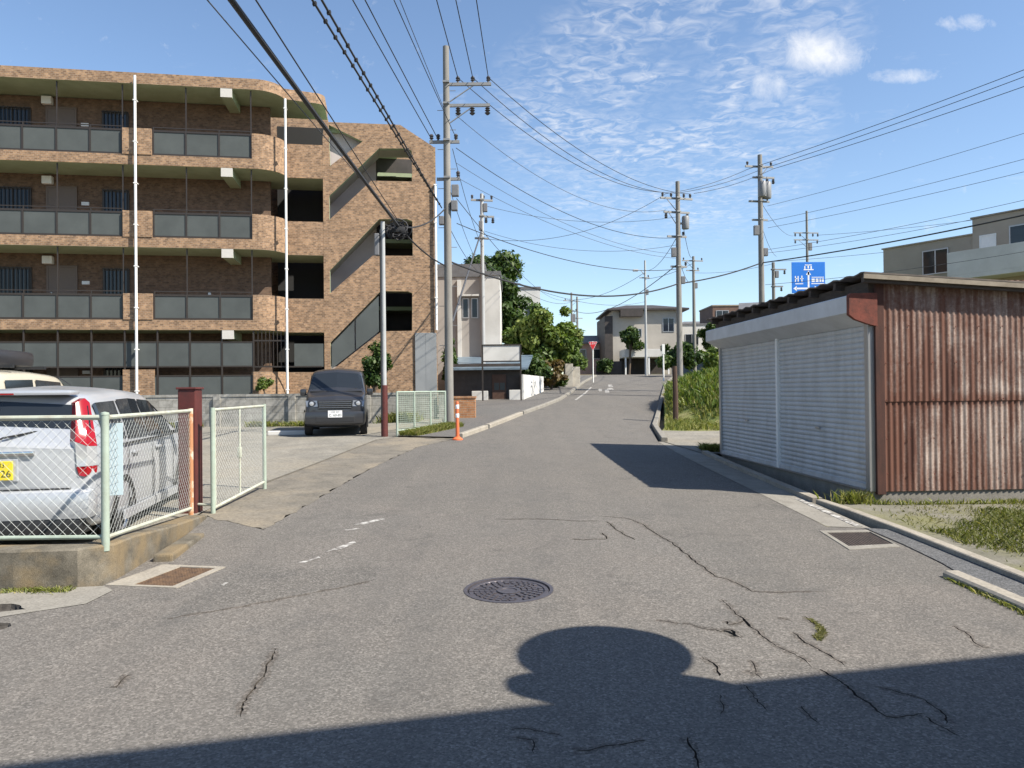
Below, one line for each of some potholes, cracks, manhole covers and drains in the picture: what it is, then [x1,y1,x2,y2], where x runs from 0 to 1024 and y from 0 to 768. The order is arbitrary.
crack [575,516,957,735]
manhole cover [464,577,553,603]
drain grate [820,530,901,550]
crack [687,737,699,768]
drain grate [106,564,225,594]
crack [240,649,276,717]
